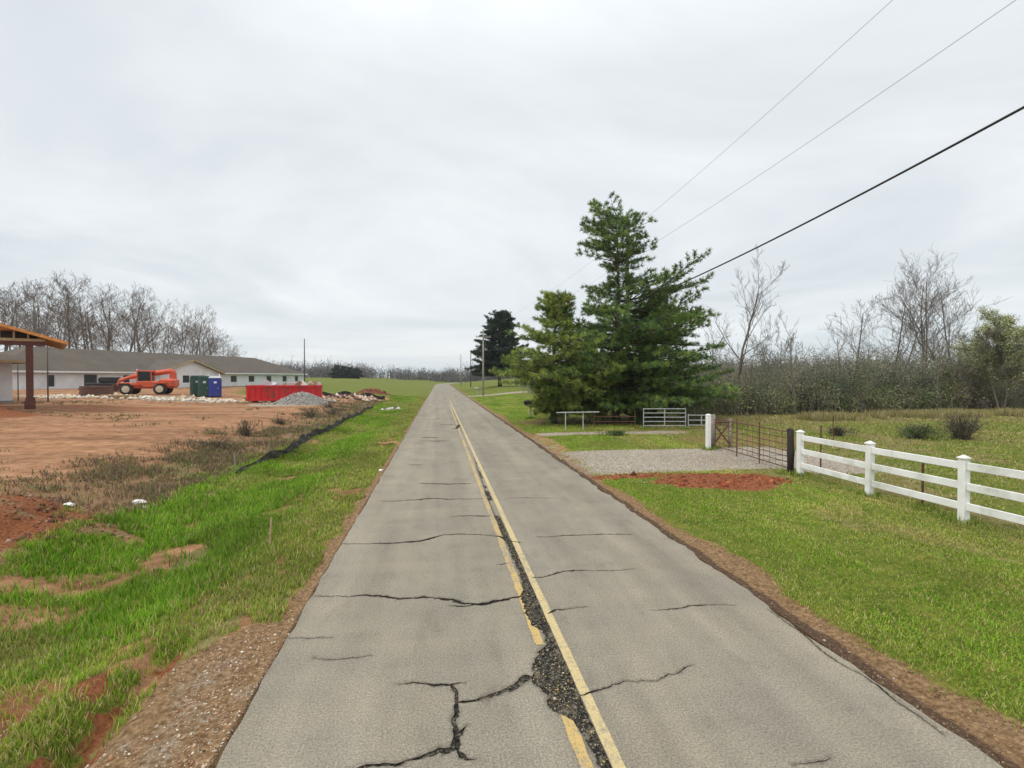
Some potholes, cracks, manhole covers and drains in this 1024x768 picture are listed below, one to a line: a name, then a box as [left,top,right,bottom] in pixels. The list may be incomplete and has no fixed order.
crack [533,569,628,578]
crack [580,665,693,696]
crack [322,594,520,607]
crack [315,656,532,768]
crack [371,534,520,544]
